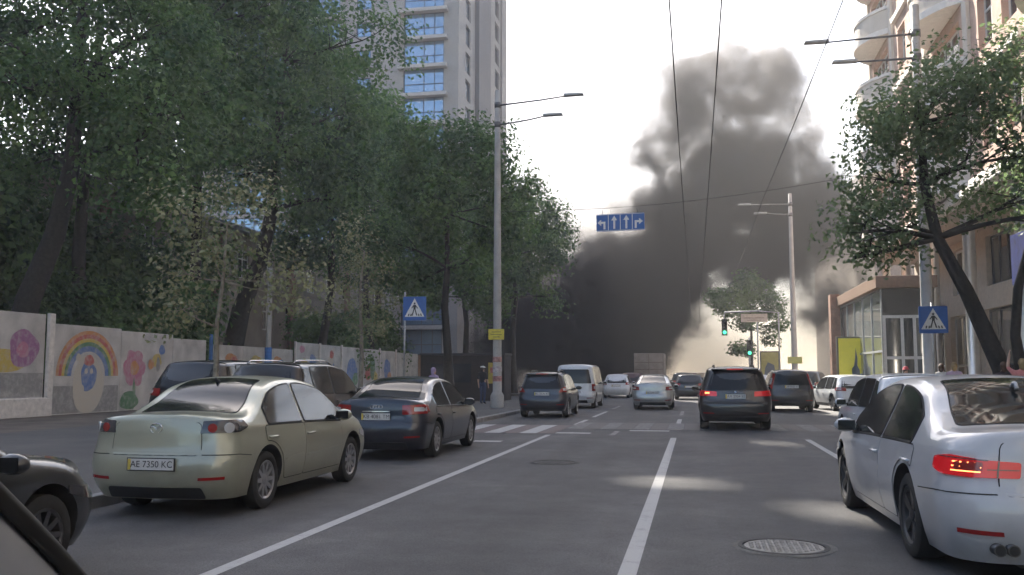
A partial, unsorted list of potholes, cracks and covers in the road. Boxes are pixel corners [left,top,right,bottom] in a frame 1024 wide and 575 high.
manhole cover [732,538,838,557]
